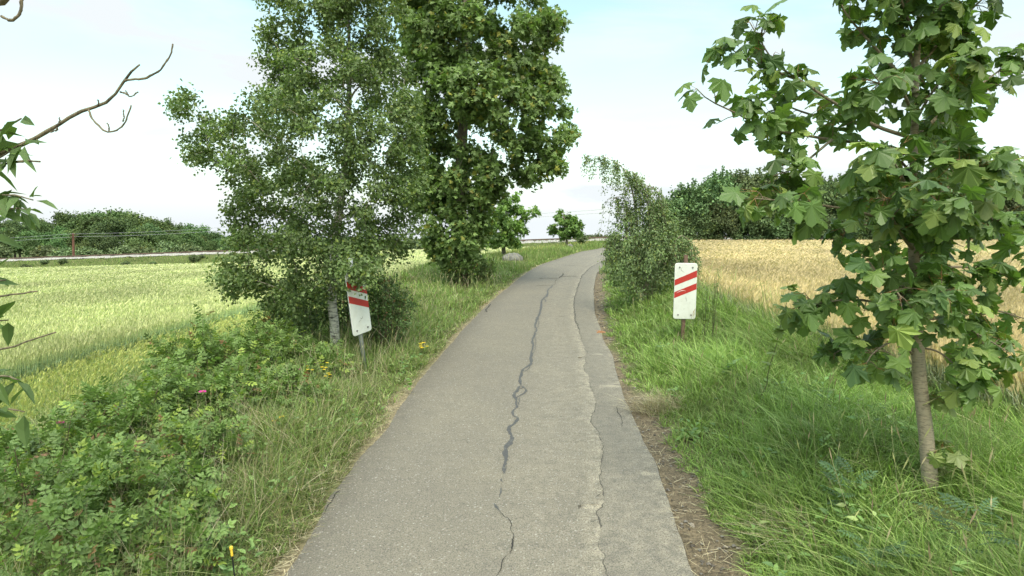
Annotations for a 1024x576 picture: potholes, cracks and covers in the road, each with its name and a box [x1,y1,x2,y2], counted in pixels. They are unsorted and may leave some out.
crack [497,490,514,575]
